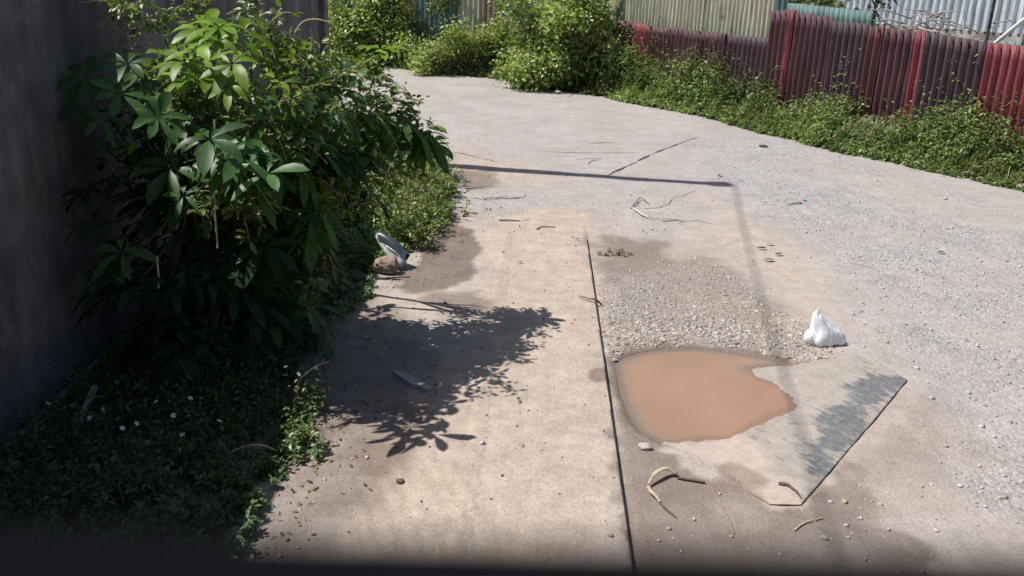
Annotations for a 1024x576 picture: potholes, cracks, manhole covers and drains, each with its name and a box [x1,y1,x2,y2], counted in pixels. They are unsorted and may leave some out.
pothole [605,343,791,447]
crack [542,137,697,175]
